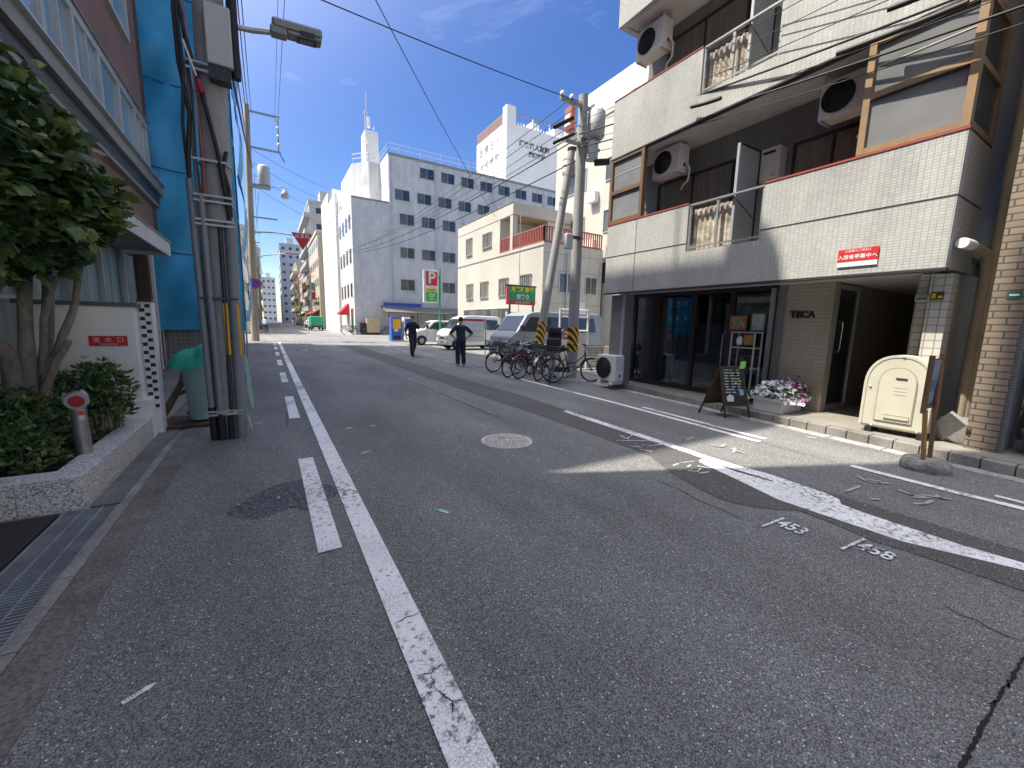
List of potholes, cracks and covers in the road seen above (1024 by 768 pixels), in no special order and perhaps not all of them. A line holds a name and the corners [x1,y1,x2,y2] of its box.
drain grate [0,504,119,651]
manhole cover [481,433,532,449]
crack [421,662,463,713]
crack [957,656,1024,768]
